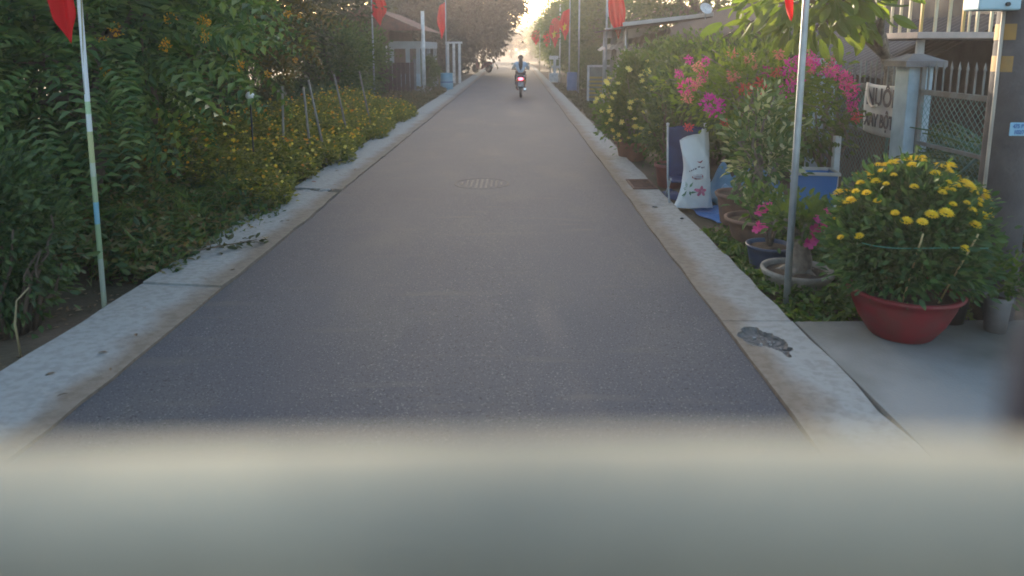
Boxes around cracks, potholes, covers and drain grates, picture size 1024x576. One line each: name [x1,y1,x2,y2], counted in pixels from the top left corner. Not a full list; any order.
manhole cover [454,178,509,189]
